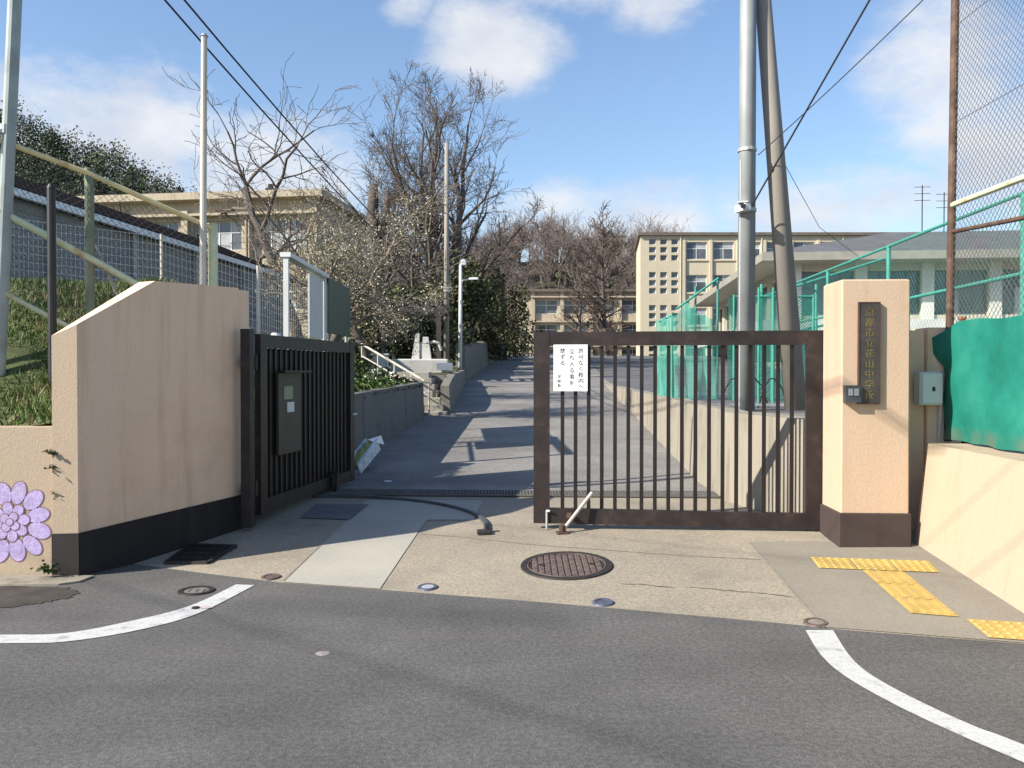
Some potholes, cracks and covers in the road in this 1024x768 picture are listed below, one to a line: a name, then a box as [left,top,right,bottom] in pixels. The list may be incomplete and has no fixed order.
manhole cover [177,585,215,596]
manhole cover [520,551,613,581]
drain grate [164,543,237,564]
